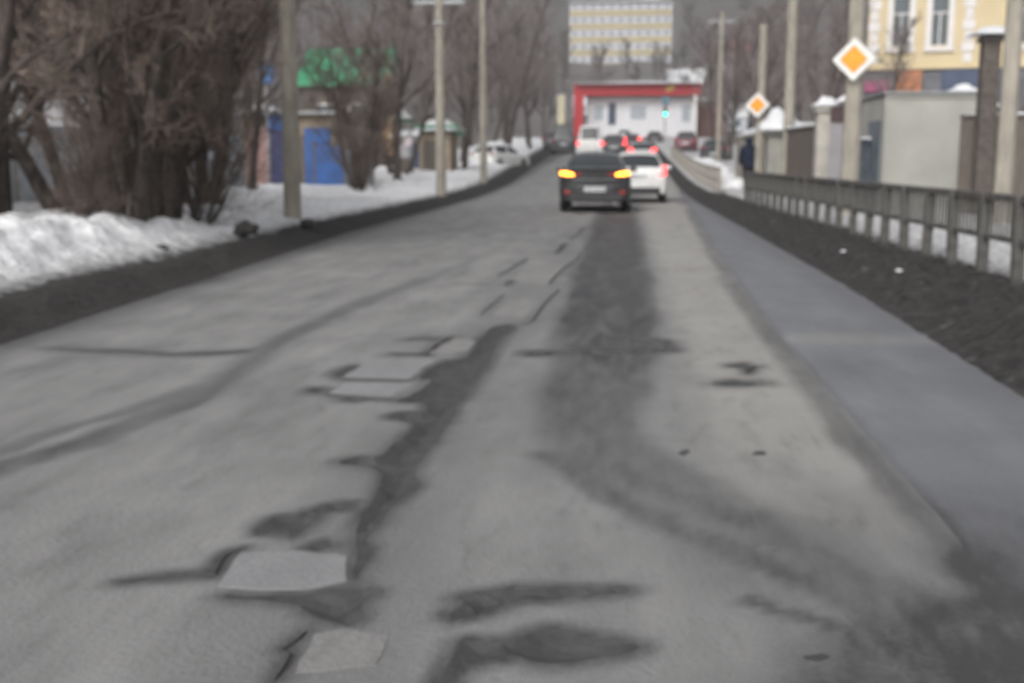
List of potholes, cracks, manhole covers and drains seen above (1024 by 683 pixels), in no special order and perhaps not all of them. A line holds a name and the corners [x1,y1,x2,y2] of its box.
pothole [307,542,332,551]
crack [452,227,586,324]
pothole [261,502,351,537]
pothole [449,586,629,620]
pothole [339,324,517,579]
pothole [439,629,640,683]
